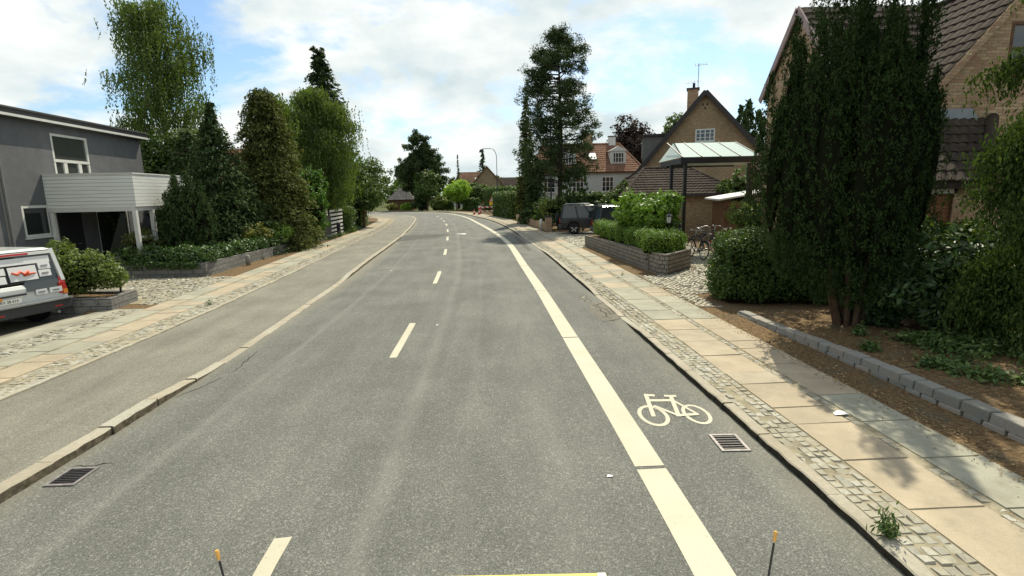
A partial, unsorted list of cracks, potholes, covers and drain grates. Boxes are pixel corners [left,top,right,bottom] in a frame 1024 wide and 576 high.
drain grate [708,434,751,452]
drain grate [42,466,100,487]
